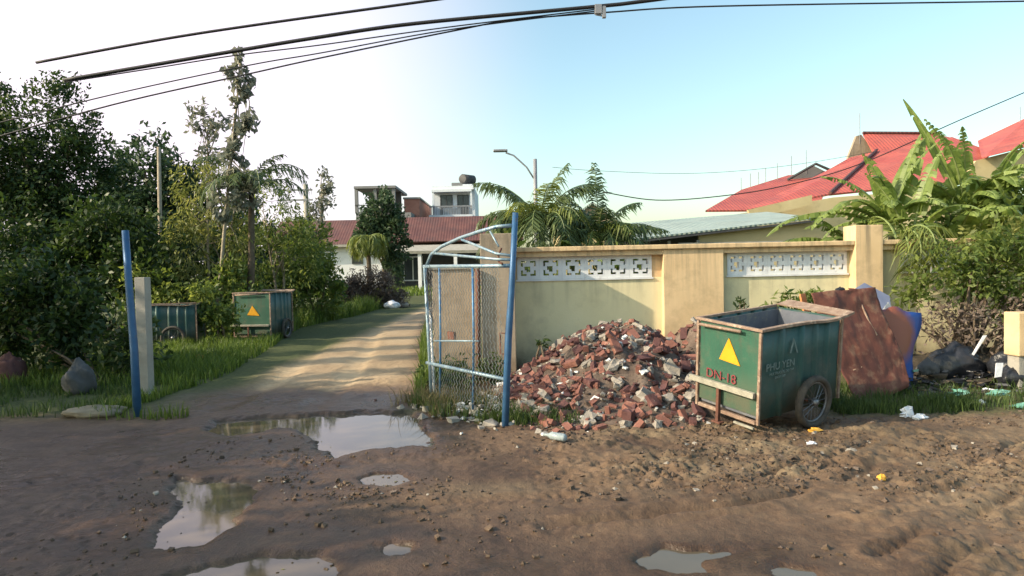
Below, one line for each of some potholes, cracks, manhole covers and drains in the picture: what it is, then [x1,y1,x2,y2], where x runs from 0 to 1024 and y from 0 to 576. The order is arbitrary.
pothole [623,539,785,576]
pothole [152,544,371,576]
pothole [135,473,274,552]
pothole [195,408,448,460]
pothole [346,468,421,490]
